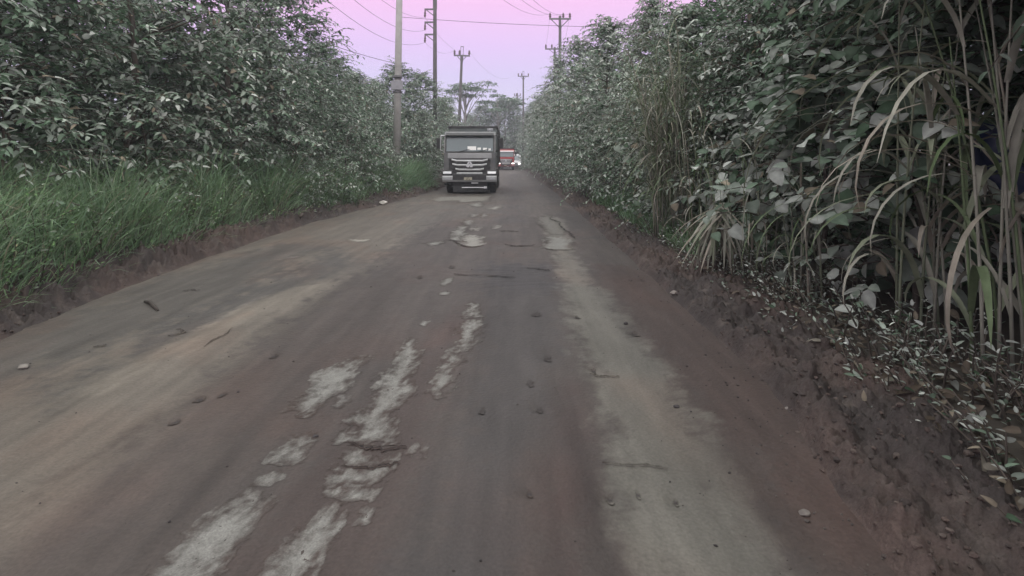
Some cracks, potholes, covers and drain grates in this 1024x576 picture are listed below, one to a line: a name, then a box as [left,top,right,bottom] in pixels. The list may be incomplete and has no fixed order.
pothole [538,236,576,250]
pothole [322,482,383,506]
pothole [281,354,376,418]
pothole [261,430,318,466]
pothole [254,501,350,576]
pothole [424,318,488,400]
pothole [330,337,427,446]
pothole [140,486,281,576]
crack [504,216,575,250]
pothole [459,234,487,247]
